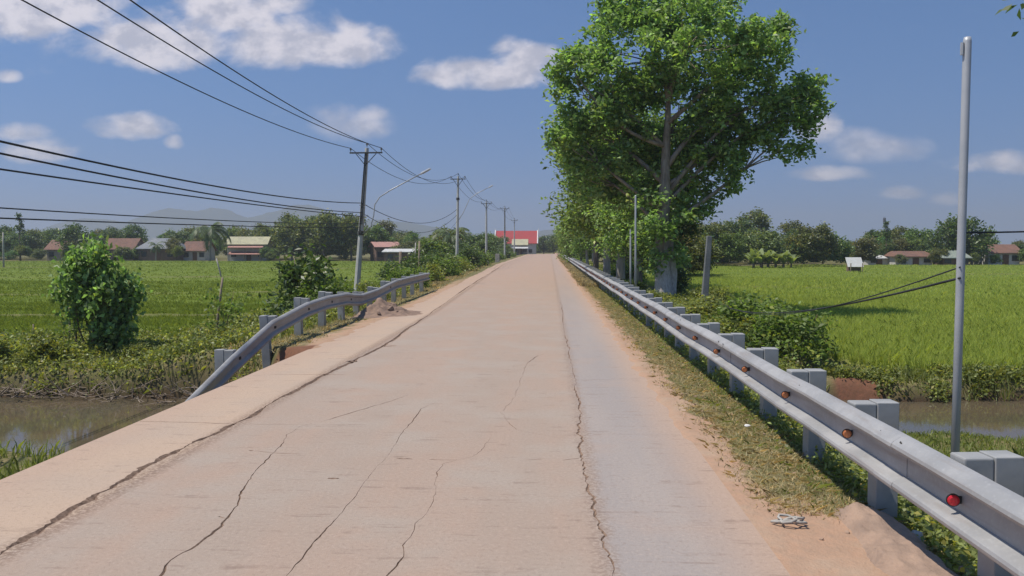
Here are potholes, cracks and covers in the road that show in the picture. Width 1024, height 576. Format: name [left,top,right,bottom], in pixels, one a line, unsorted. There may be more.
crack [159,397,431,576]
crack [386,443,486,576]
